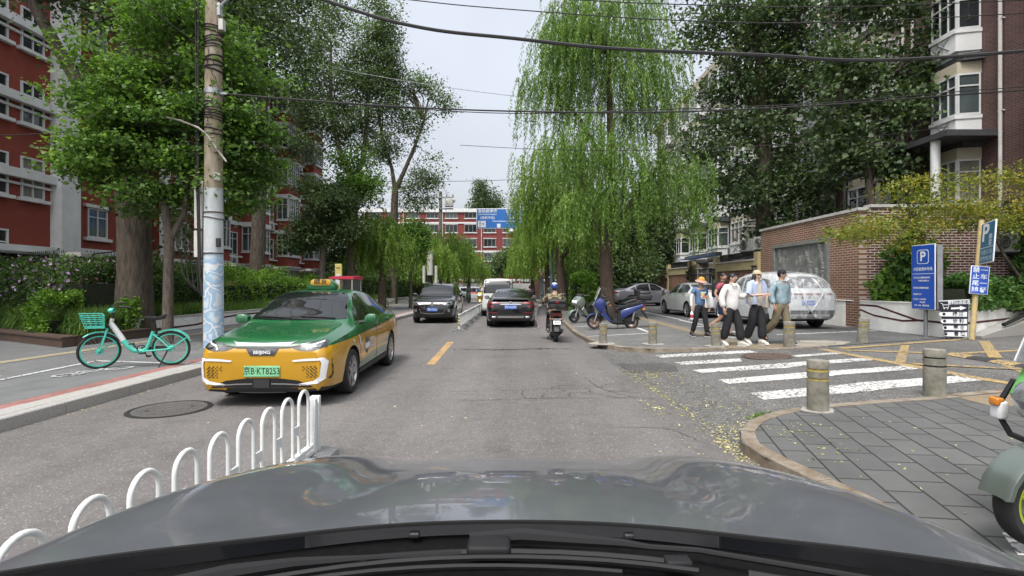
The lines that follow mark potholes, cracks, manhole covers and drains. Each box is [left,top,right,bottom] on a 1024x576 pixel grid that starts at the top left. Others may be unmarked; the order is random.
manhole cover [123,400,214,418]
